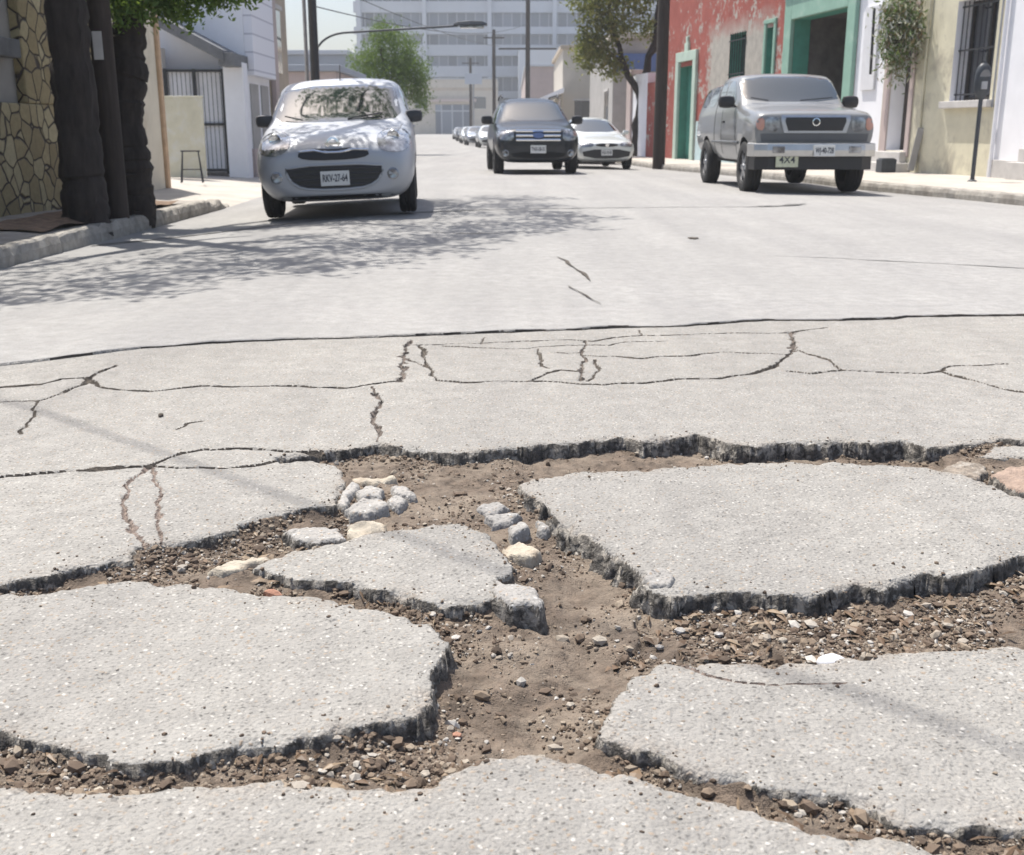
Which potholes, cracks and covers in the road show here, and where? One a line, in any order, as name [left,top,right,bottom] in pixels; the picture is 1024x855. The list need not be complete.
crack [557,256,600,303]
crack [680,665,847,686]
pothole [319,455,554,553]
crack [0,447,484,641]
pothole [429,538,642,768]
pothole [512,450,946,479]
crack [0,327,1024,442]
pothole [942,443,1024,484]
